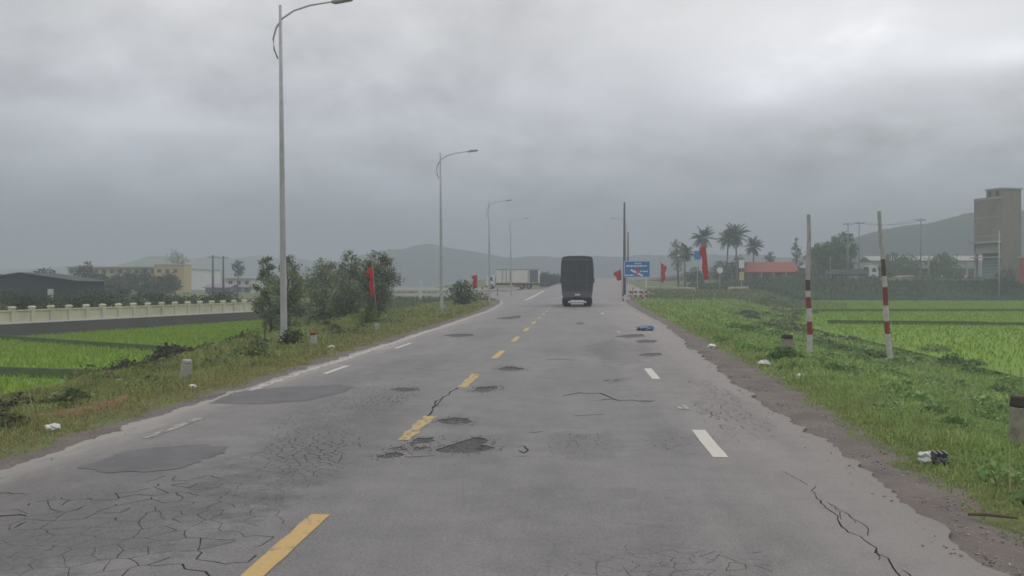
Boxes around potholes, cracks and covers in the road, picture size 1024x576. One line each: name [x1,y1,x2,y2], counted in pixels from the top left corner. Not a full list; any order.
crack [792,476,911,576]
crack [564,378,652,416]
pothole [435,437,494,453]
crack [0,475,284,576]
crack [255,382,463,507]
pothole [410,437,435,446]
pothole [437,417,472,425]
